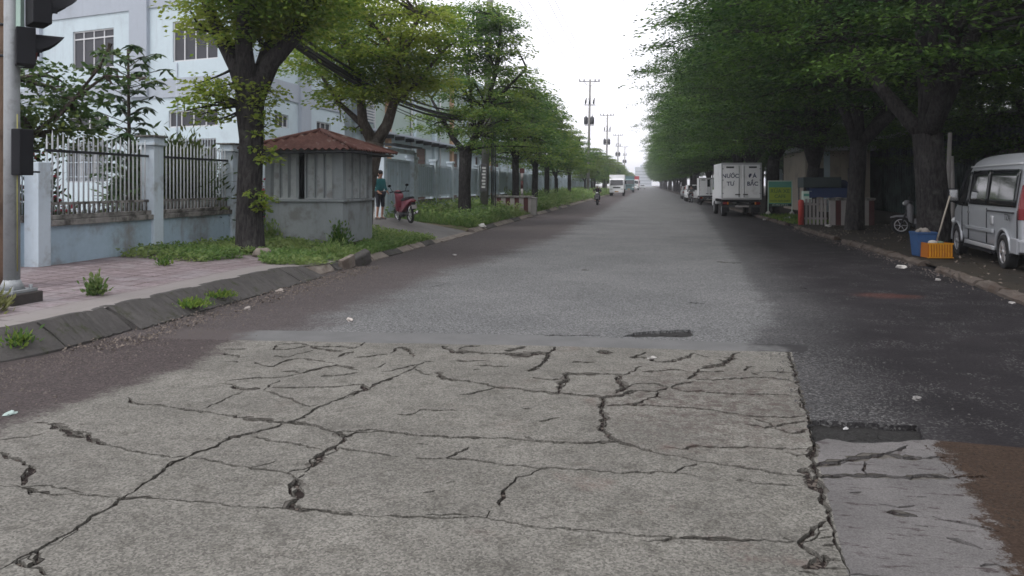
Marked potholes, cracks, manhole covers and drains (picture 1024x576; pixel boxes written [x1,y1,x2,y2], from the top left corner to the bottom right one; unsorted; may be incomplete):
crack [0,334,1008,576]
pothole [806,420,926,446]
